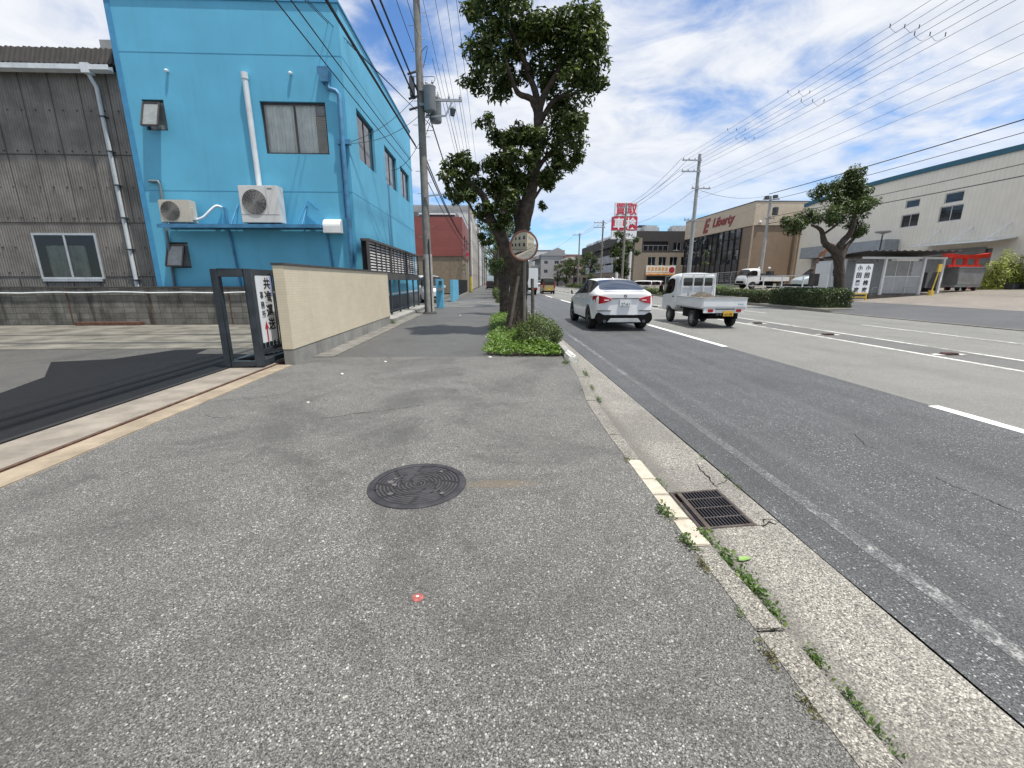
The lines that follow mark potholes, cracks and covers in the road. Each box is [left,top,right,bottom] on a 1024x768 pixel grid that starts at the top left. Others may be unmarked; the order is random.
manhole cover [367,463,466,509]
drain grate [669,489,757,530]
